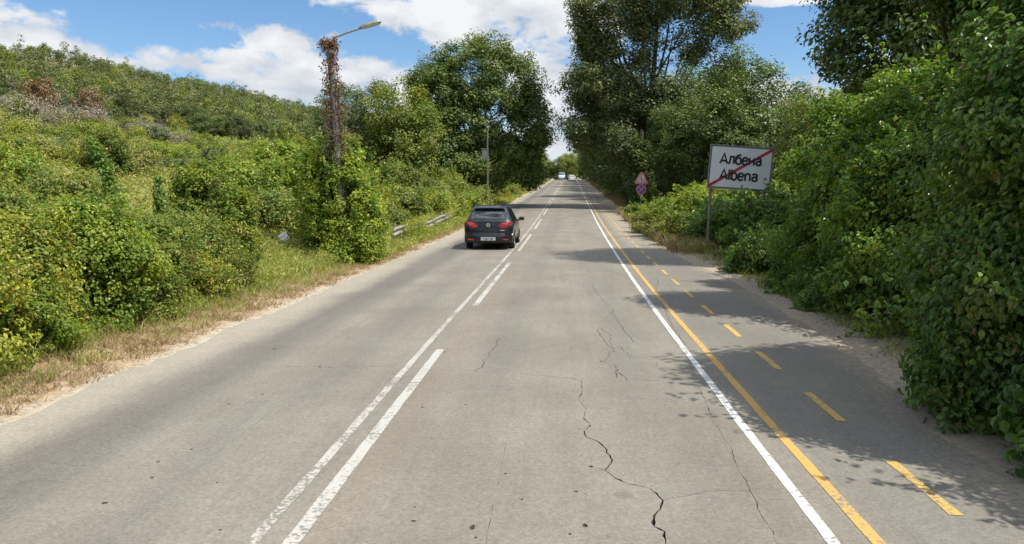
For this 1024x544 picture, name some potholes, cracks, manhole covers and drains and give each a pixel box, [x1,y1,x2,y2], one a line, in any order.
crack [528,374,666,544]
crack [665,393,777,543]
crack [592,278,667,381]
